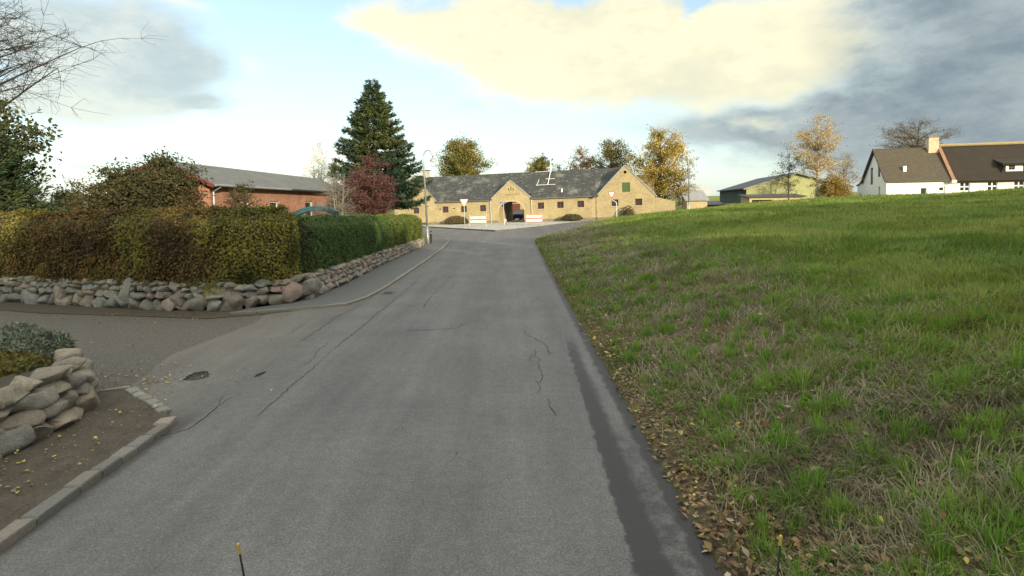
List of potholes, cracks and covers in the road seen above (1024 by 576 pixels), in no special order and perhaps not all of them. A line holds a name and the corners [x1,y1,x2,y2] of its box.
crack [164,396,226,436]
pothole [183,371,210,381]
crack [524,330,556,416]
